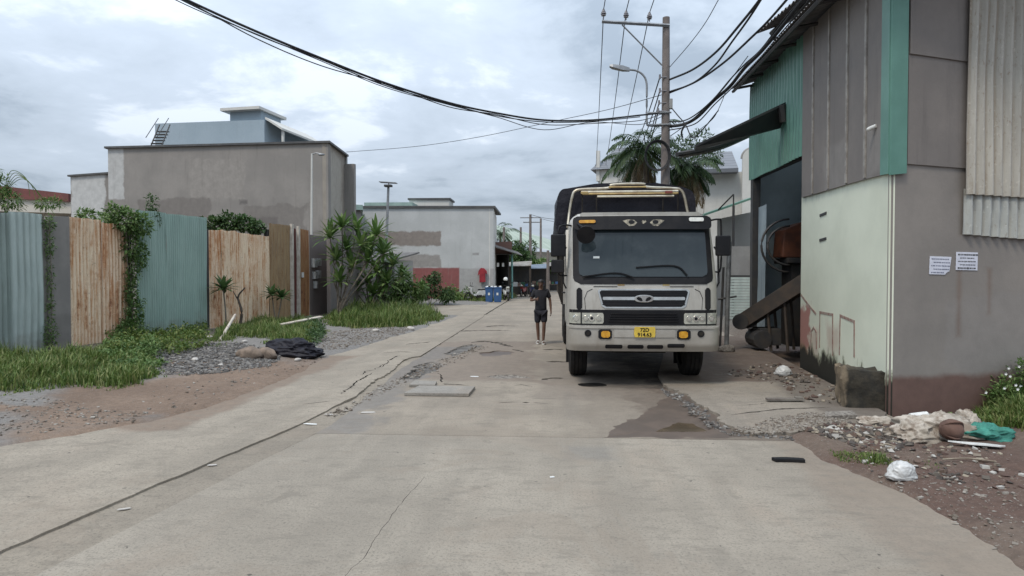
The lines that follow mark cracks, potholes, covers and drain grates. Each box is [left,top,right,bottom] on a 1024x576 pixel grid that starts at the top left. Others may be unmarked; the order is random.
crack [345,479,423,576]
pothole [403,362,442,379]
crack [308,342,427,404]
manhole cover [404,385,475,396]
pothole [443,344,482,357]
pothole [603,395,745,439]
